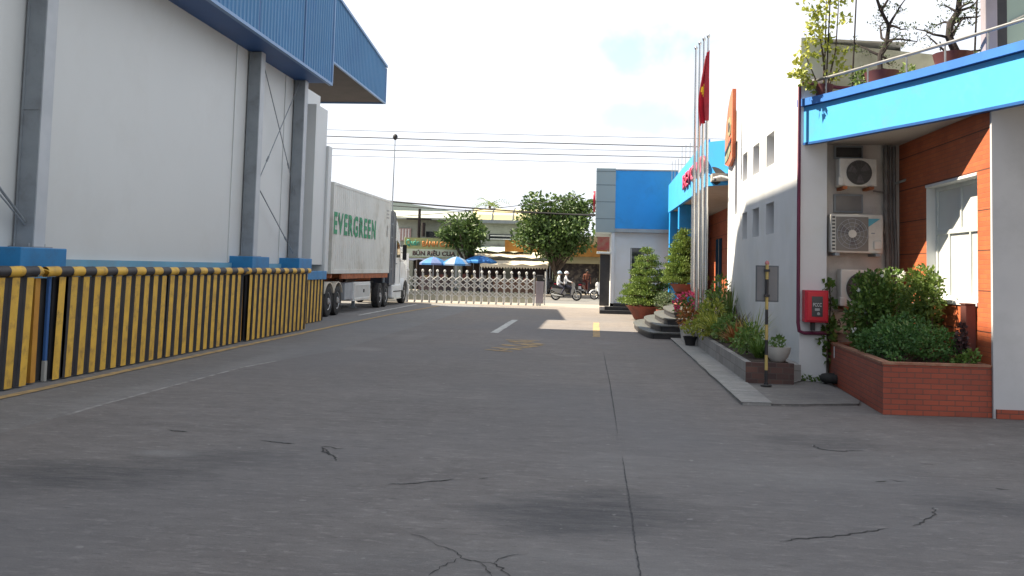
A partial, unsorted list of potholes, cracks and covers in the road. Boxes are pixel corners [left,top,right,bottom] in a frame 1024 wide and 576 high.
crack [410,533,528,576]
crack [780,507,937,542]
